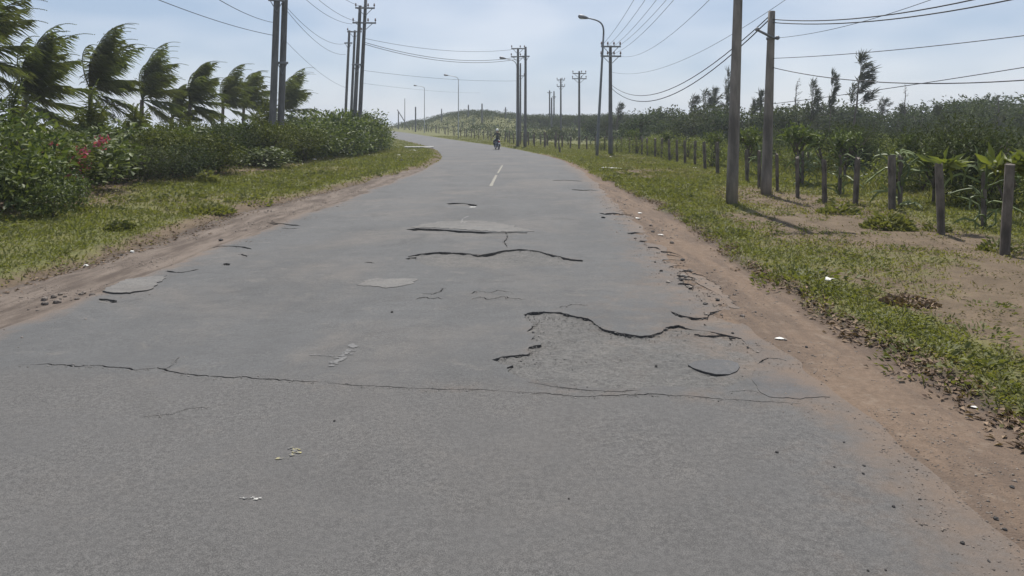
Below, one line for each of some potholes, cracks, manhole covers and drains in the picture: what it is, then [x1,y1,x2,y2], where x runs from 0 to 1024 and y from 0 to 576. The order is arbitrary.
crack [517,382,797,404]
crack [30,359,316,382]
